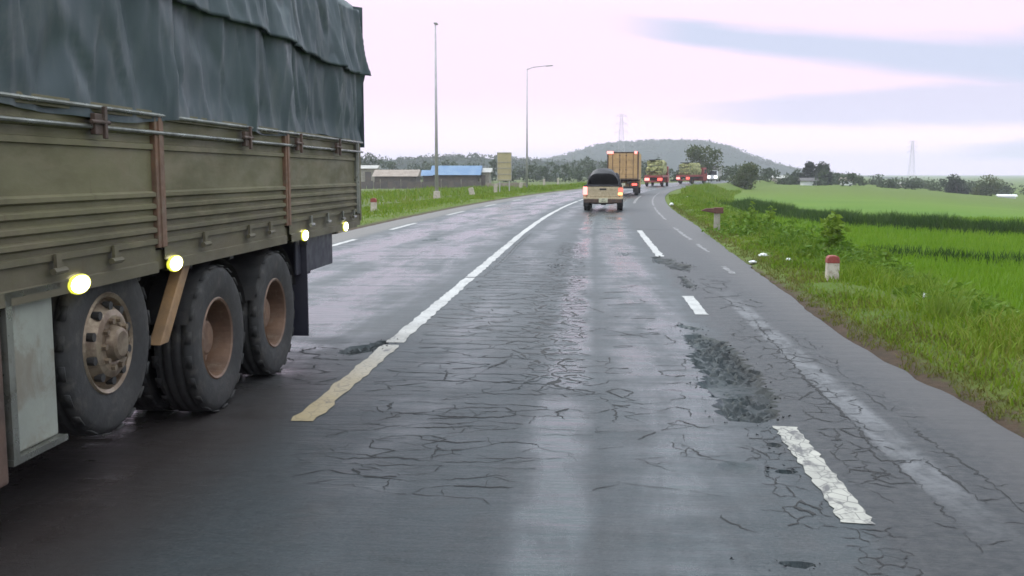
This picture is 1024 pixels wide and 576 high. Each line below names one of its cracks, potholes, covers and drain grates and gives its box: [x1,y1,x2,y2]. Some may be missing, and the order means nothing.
pothole [647,256,695,272]
pothole [675,329,791,426]
crack [238,342,361,391]
pothole [325,338,398,356]
crack [844,527,923,576]
crack [285,232,835,529]
crack [701,276,1024,552]
